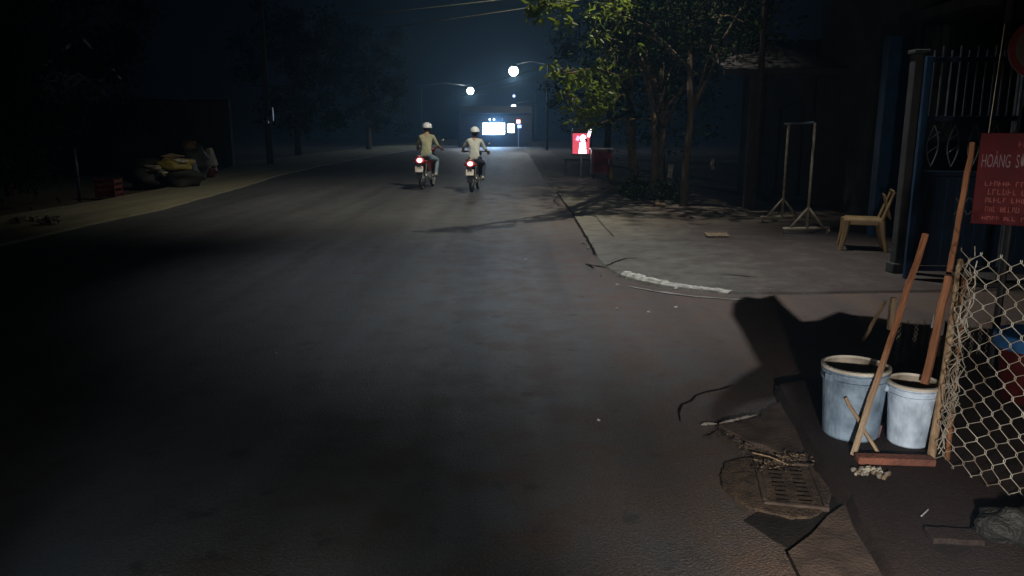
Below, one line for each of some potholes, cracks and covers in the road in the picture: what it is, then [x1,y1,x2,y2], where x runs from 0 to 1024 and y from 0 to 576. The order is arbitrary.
crack [547,191,638,268]
crack [678,385,757,436]
